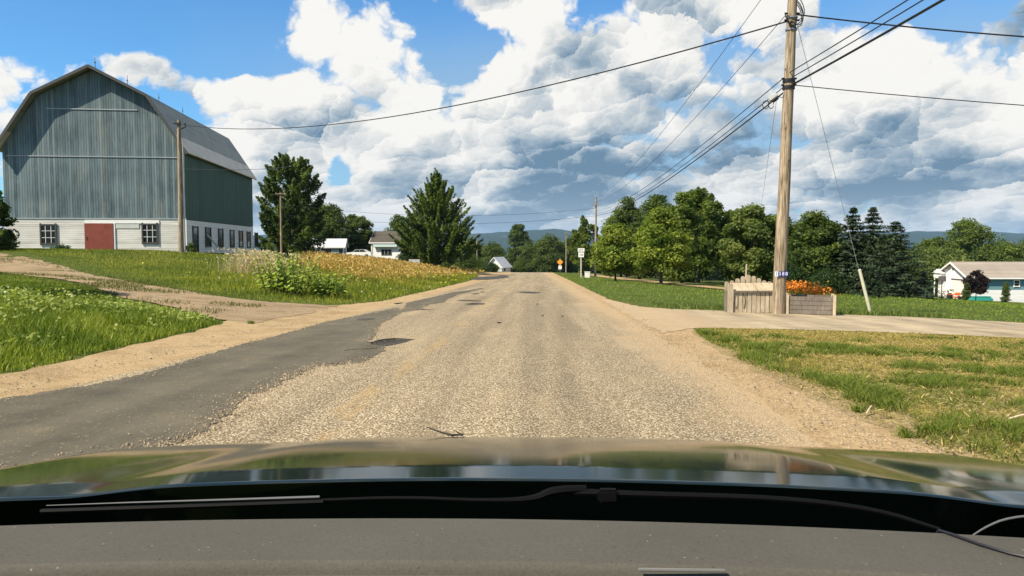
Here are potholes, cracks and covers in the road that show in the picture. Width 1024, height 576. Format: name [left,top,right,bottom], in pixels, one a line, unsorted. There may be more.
pothole [368,338,415,346]
